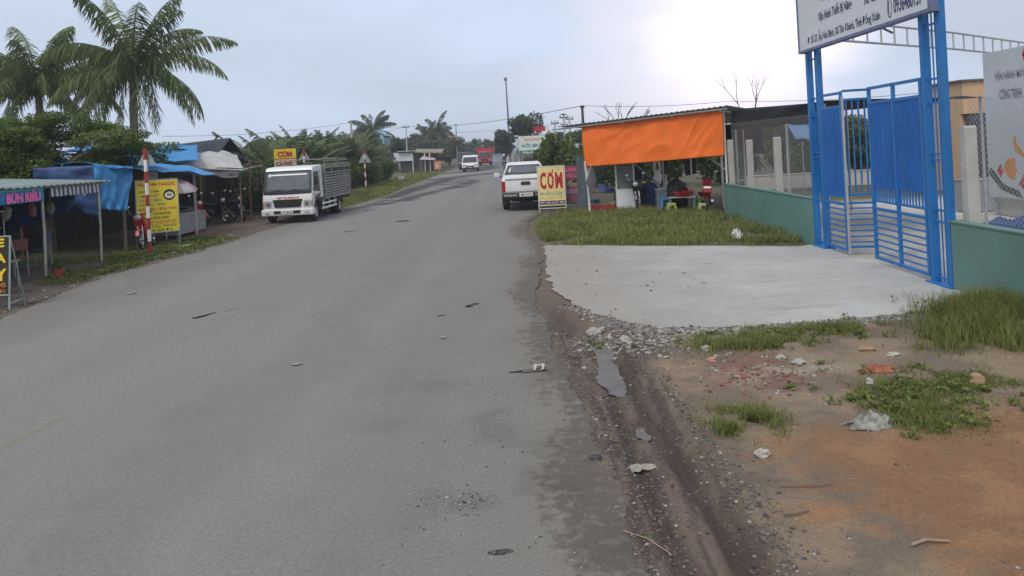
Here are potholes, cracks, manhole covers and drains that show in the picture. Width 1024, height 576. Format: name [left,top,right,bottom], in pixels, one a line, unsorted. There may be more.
pothole [487,548,514,556]
